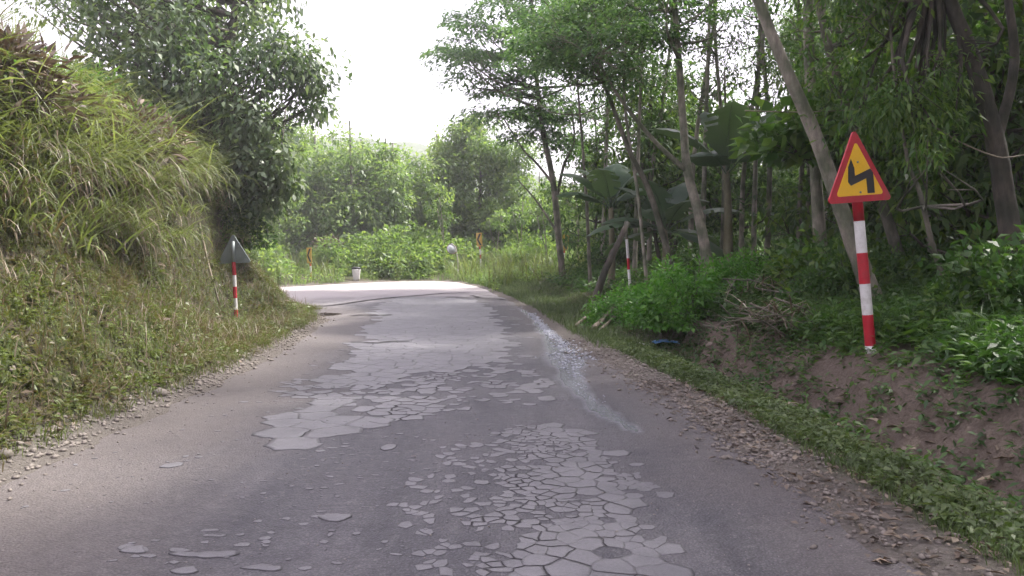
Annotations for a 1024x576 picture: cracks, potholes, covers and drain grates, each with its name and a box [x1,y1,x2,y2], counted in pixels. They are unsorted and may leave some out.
crack [285,373,545,420]
crack [451,425,648,576]
